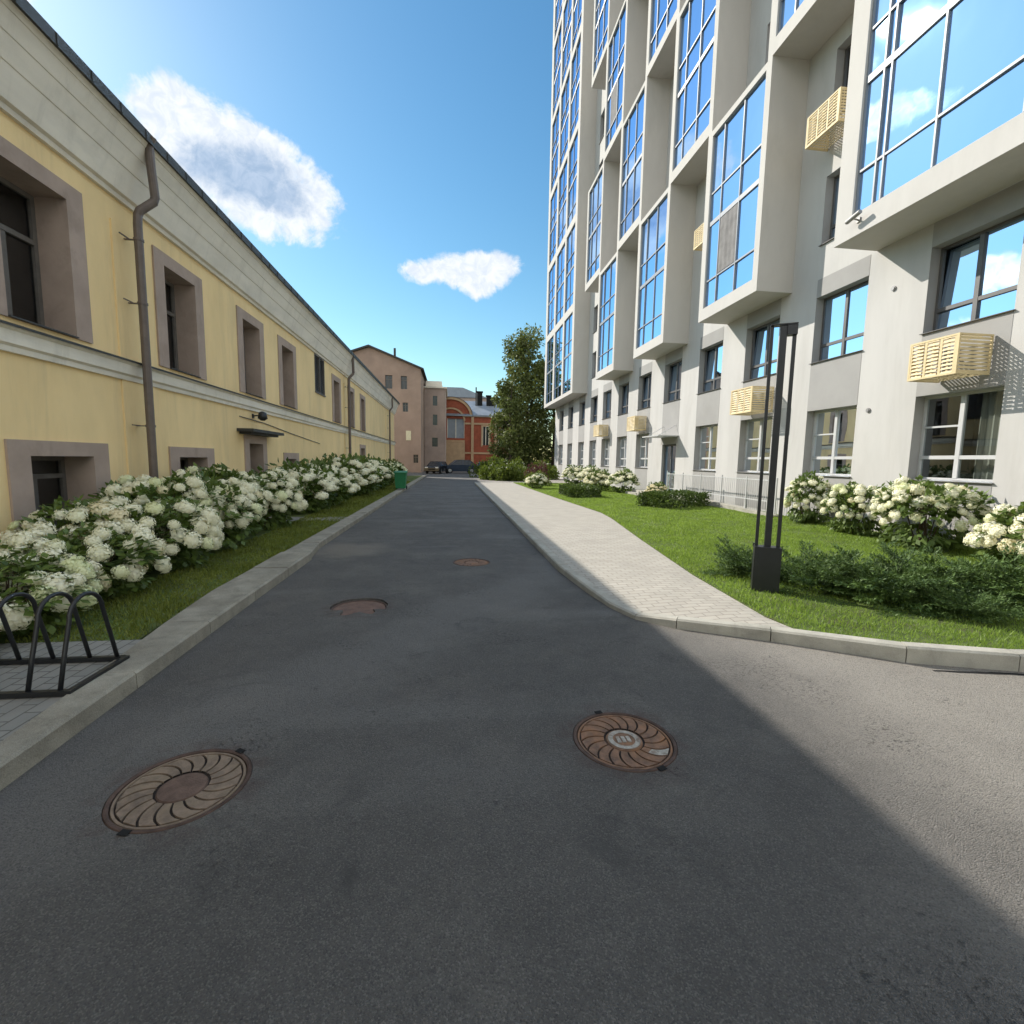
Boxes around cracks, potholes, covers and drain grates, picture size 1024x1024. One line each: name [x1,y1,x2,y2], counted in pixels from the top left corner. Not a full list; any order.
manhole cover [102,748,252,836]
manhole cover [331,600,387,615]
manhole cover [573,710,678,773]
manhole cover [453,558,490,566]
